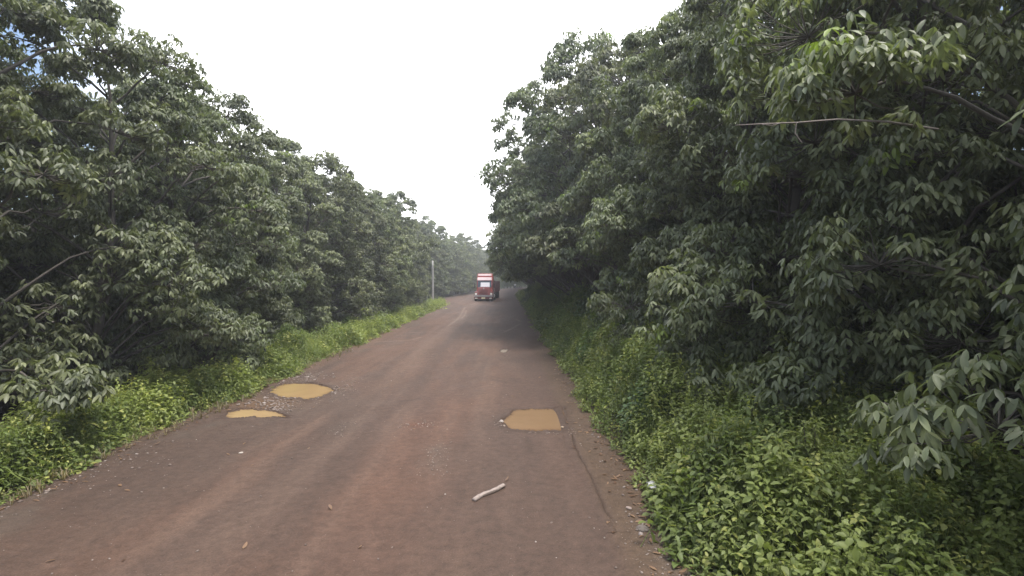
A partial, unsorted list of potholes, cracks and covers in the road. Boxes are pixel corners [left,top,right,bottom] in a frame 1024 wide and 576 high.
pothole [493,406,574,435]
pothole [264,381,341,402]
pothole [214,407,298,419]
crack [552,402,630,533]
